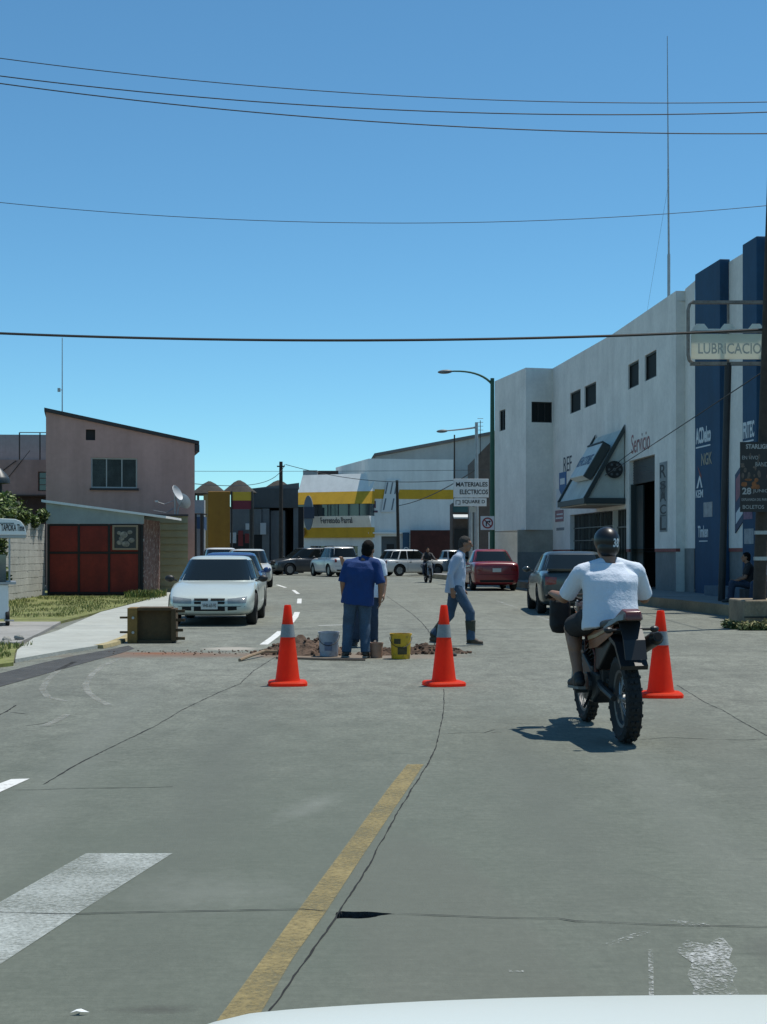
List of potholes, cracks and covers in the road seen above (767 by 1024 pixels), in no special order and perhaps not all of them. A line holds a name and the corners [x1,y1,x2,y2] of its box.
pothole [335,911,391,919]
crack [405,913,767,927]
crack [18,689,576,1012]
